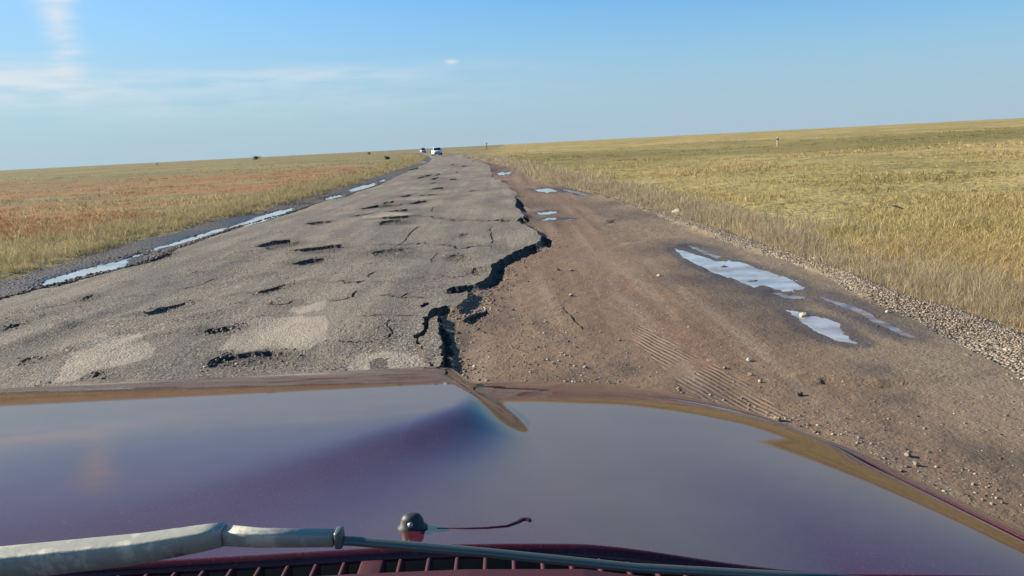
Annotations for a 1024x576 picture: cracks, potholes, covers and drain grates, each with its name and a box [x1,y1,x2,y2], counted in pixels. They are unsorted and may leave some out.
pothole [145,302,187,315]
pothole [207,351,293,368]
pothole [204,326,236,335]
pothole [293,258,326,266]
pothole [255,240,303,251]
crack [328,198,552,369]
pothole [291,244,348,254]
